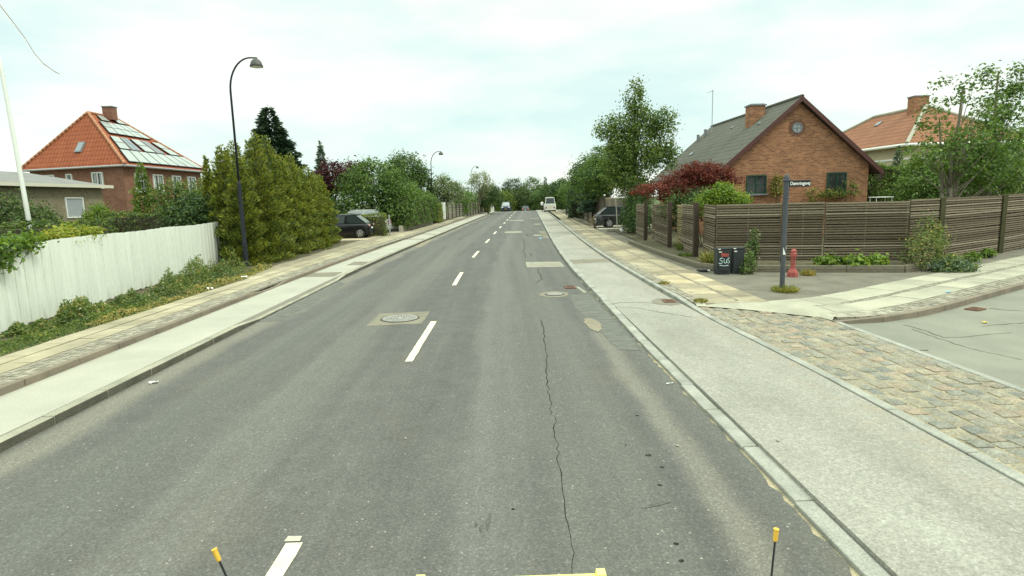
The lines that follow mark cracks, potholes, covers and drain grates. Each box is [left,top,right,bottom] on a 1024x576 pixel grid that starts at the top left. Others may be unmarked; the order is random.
manhole cover [380,314,420,323]
crack [906,308,1022,360]
crack [541,320,574,572]
